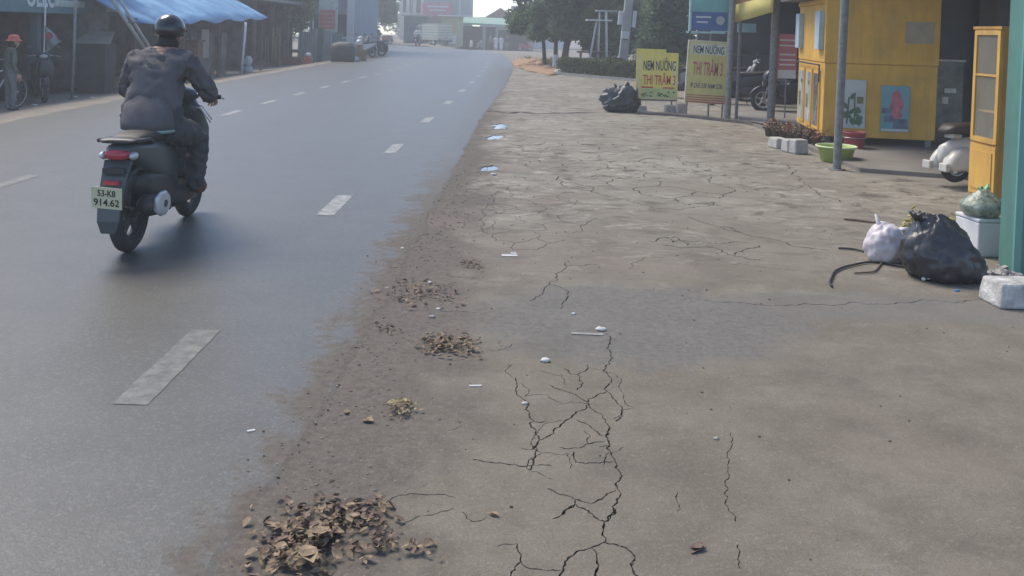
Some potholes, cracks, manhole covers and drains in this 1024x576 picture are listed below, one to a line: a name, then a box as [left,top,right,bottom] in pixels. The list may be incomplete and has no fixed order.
crack [474,337,638,576]
crack [724,432,736,522]
crack [390,493,485,526]
crack [530,261,597,309]
crack [479,142,825,270]
crack [781,163,866,209]
